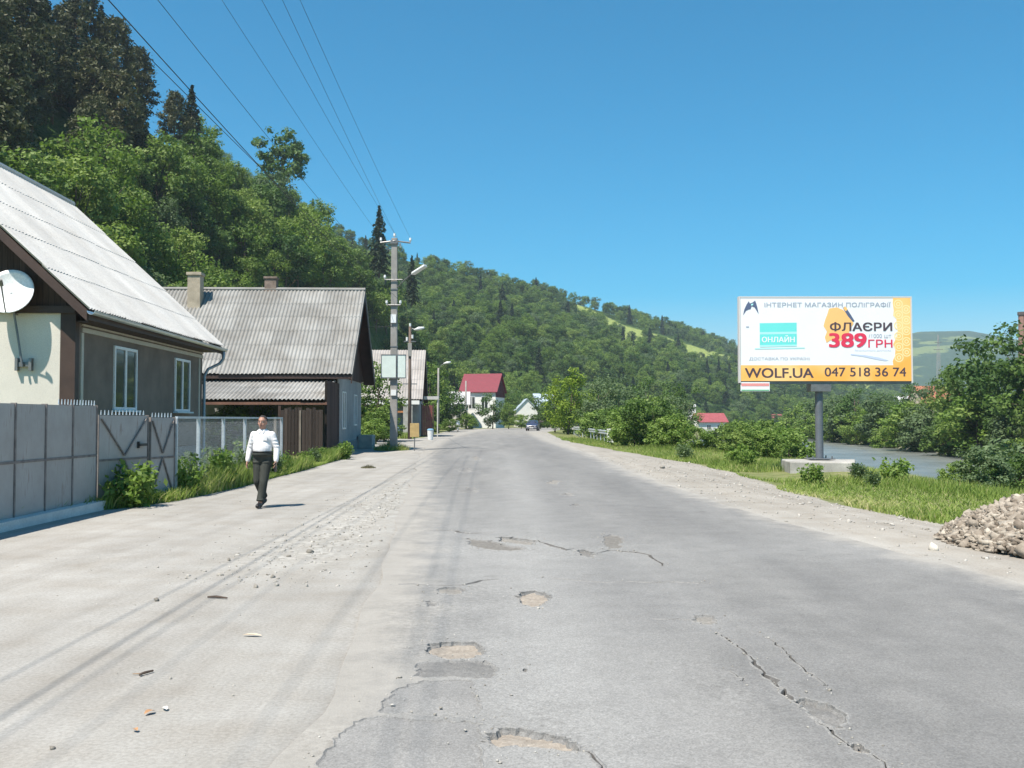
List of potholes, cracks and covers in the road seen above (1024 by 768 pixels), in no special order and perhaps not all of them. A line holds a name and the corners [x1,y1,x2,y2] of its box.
pothole [689,614,719,625]
pothole [422,641,490,660]
pothole [464,538,527,551]
pothole [599,534,627,549]
crack [427,530,665,566]
pothole [434,586,466,595]
pothole [513,590,553,607]
crack [717,633,892,768]
pothole [480,726,583,753]
